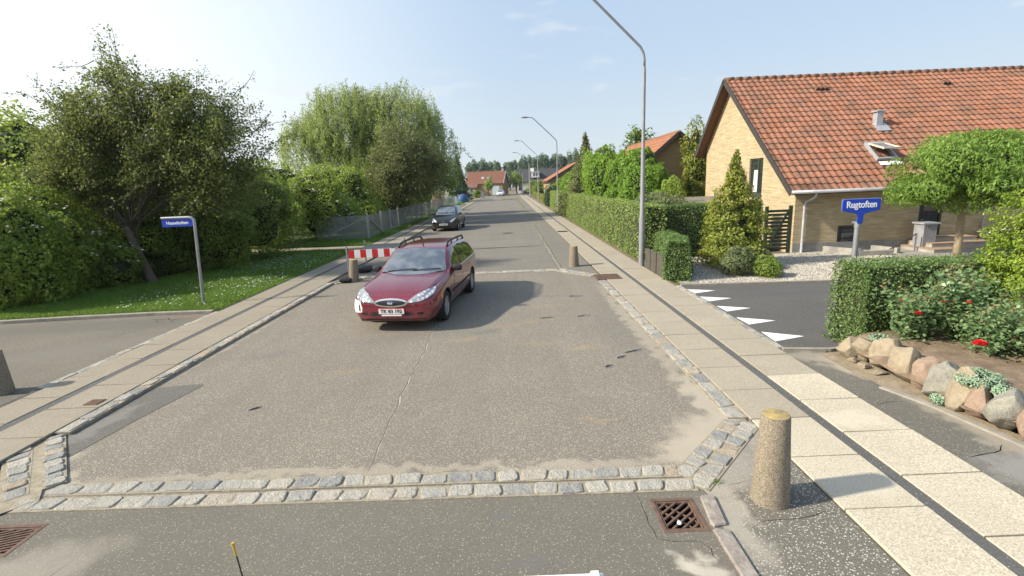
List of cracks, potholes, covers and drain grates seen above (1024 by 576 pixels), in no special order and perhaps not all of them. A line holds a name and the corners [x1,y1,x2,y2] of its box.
drain grate [0,523,49,557]
crack [369,326,436,469]
crack [754,510,835,527]
drain grate [649,497,711,533]
crack [637,496,718,560]
